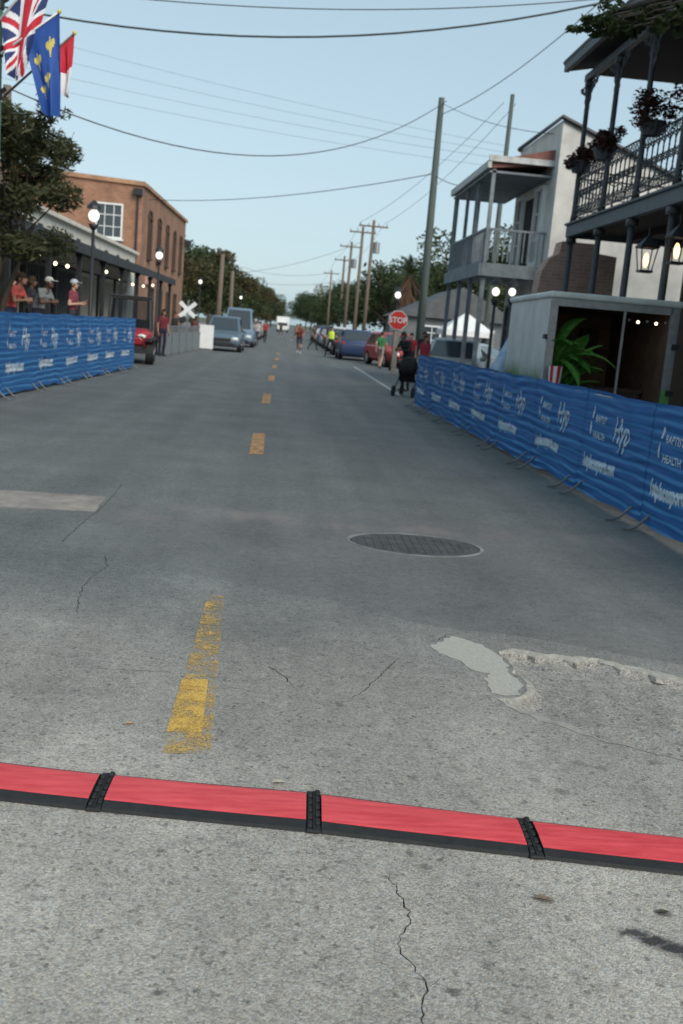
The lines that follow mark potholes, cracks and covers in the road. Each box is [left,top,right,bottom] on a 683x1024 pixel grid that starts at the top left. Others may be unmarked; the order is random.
crack [388,873,440,1024]
pothole [498,648,683,761]
manhole cover [346,533,484,557]
crack [76,556,108,613]
